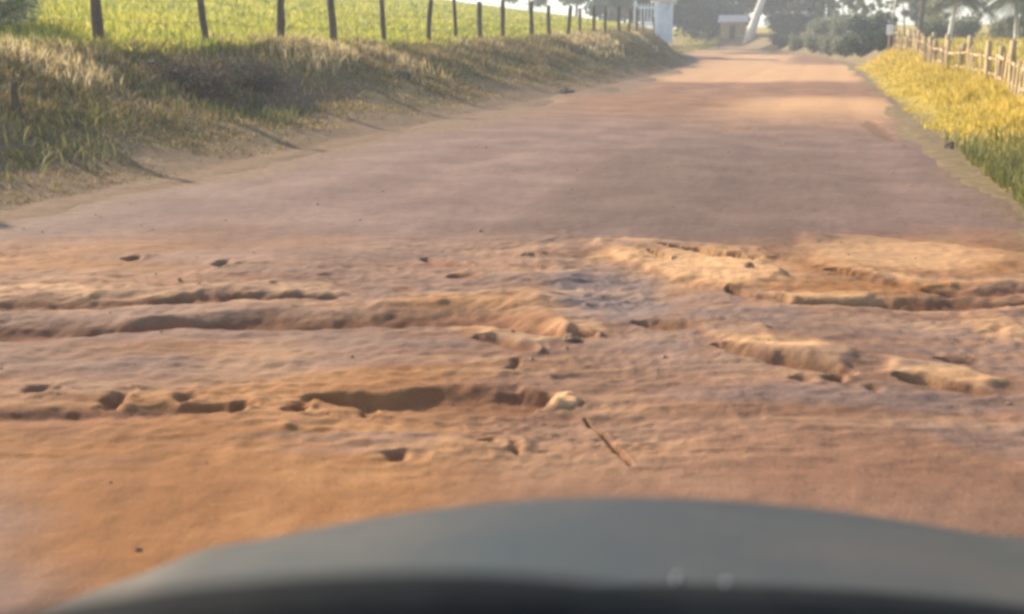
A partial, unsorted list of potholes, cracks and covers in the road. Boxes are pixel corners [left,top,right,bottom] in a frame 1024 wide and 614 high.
pothole [224,396,261,415]
pothole [893,370,997,398]
pothole [351,409,380,423]
pothole [784,372,821,383]
pothole [817,372,850,384]
pothole [167,387,206,404]
pothole [708,340,858,377]
pothole [298,380,559,419]
pothole [376,446,413,463]
pothole [277,399,317,414]
pothole [930,355,984,367]
pothole [92,387,139,411]
